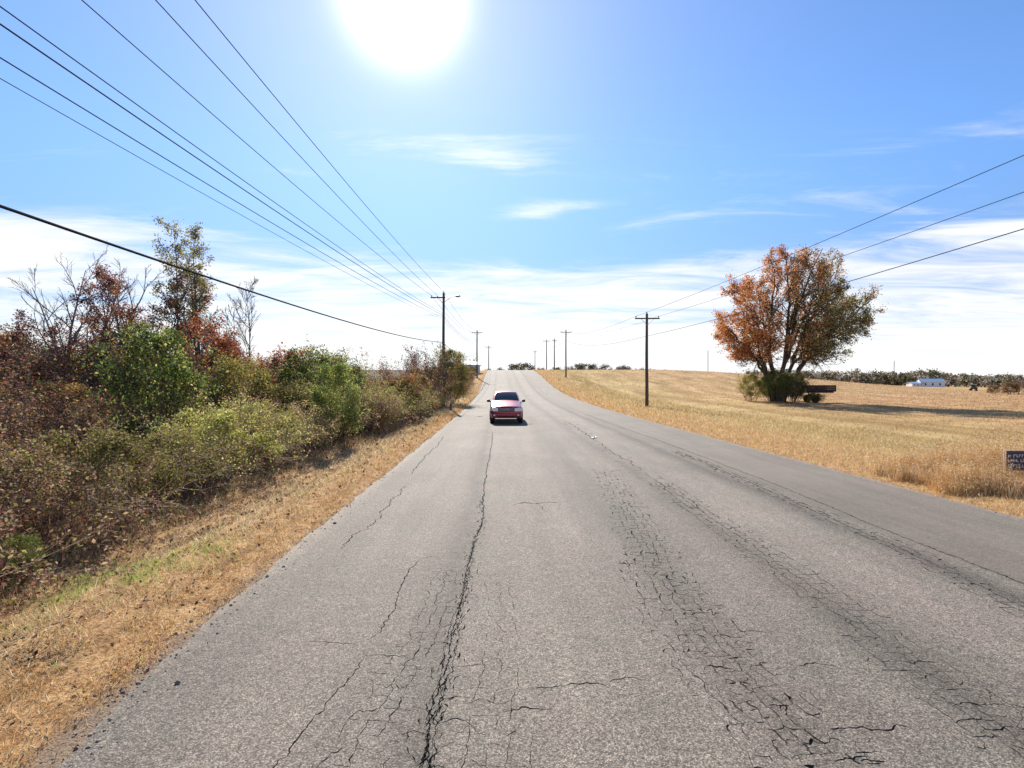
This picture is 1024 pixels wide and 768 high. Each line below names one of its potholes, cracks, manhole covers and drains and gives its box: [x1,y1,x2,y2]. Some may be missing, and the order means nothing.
crack [536,677,650,689]
crack [272,556,462,768]
crack [565,423,1024,759]
